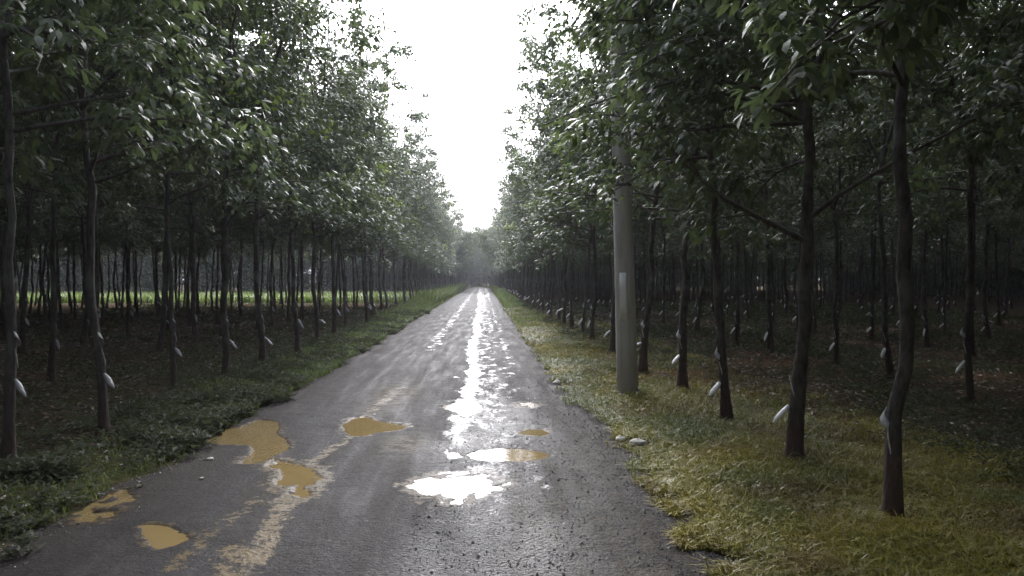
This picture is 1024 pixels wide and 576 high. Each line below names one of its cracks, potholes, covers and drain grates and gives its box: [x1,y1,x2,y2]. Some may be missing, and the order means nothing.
pothole [120,518,206,554]
pothole [508,427,561,438]
pothole [463,445,563,464]
pothole [256,457,335,502]
pothole [391,468,524,508]
pothole [333,414,419,438]
pothole [52,486,147,527]
